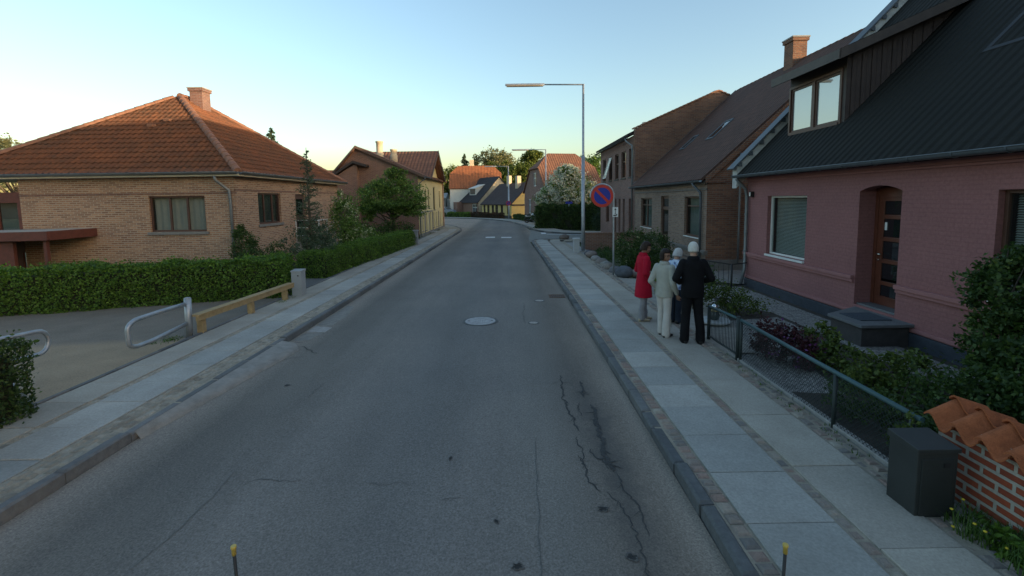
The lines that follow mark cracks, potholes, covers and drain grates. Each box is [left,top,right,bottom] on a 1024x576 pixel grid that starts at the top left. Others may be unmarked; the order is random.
crack [530,375,651,576]
manhole cover [463,316,498,326]
